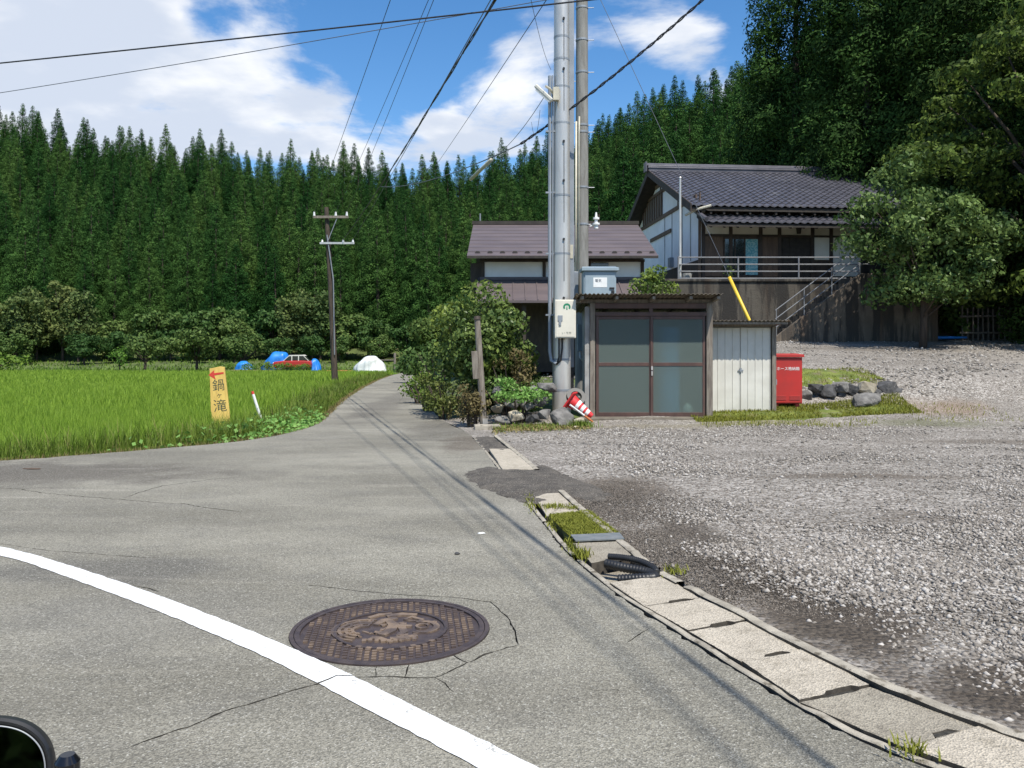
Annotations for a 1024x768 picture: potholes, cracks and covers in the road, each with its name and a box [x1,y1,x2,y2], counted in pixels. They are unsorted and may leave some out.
crack [129,585,520,748]
manhole cover [289,598,490,677]
crack [6,477,238,512]
